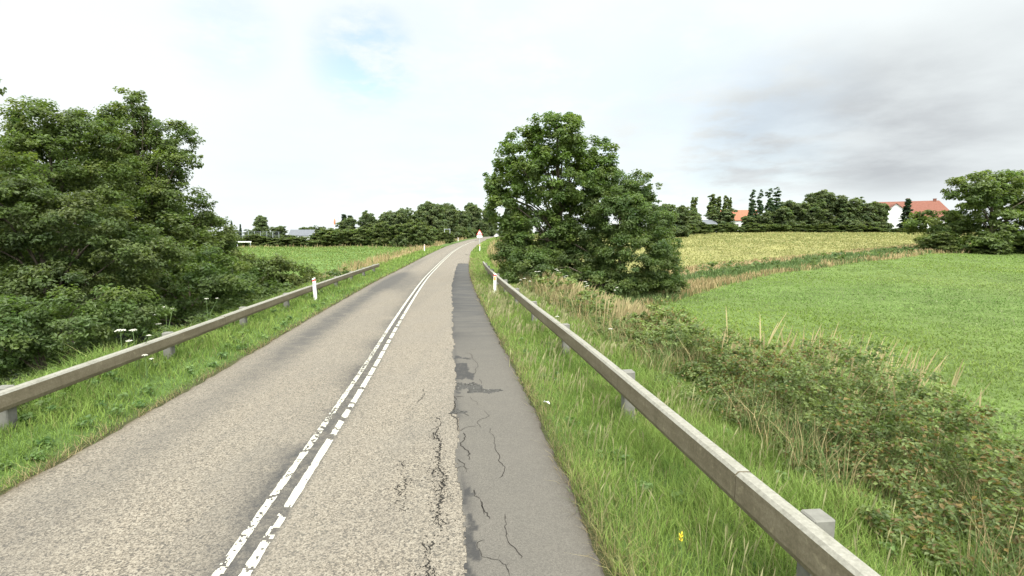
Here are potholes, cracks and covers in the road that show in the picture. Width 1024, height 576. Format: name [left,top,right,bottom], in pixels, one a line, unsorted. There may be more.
crack [477,516,523,576]
crack [385,461,413,511]
crack [414,416,505,576]
